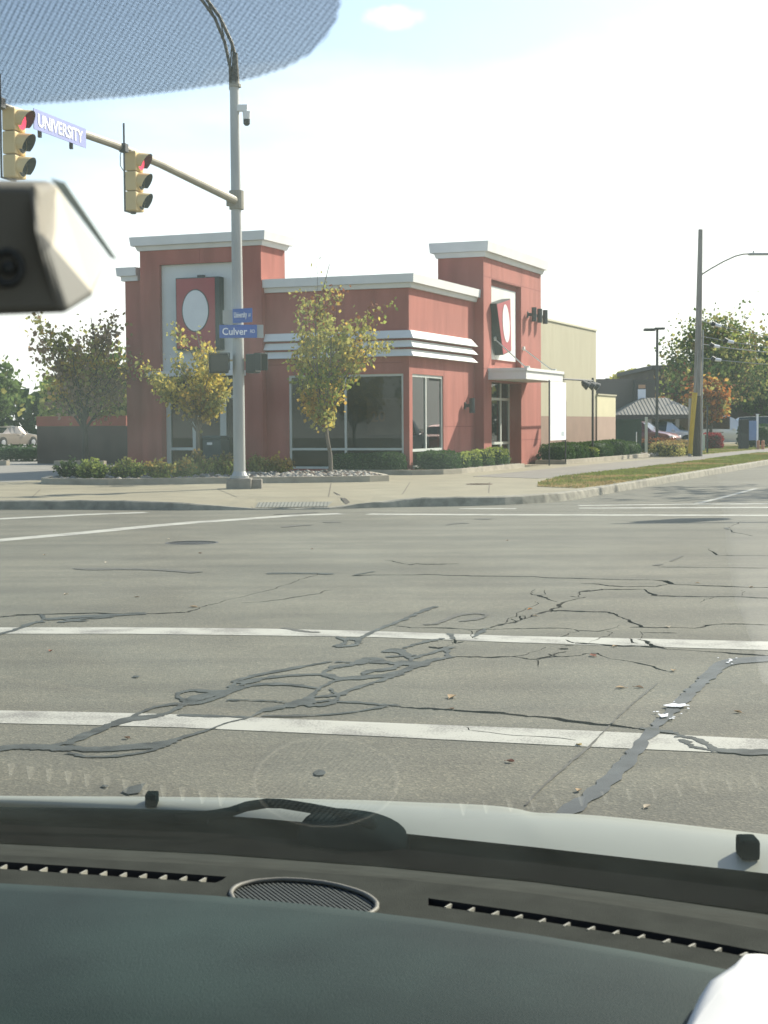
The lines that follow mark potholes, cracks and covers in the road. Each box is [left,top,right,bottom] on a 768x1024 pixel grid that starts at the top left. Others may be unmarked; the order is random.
crack [0,522,768,757]
